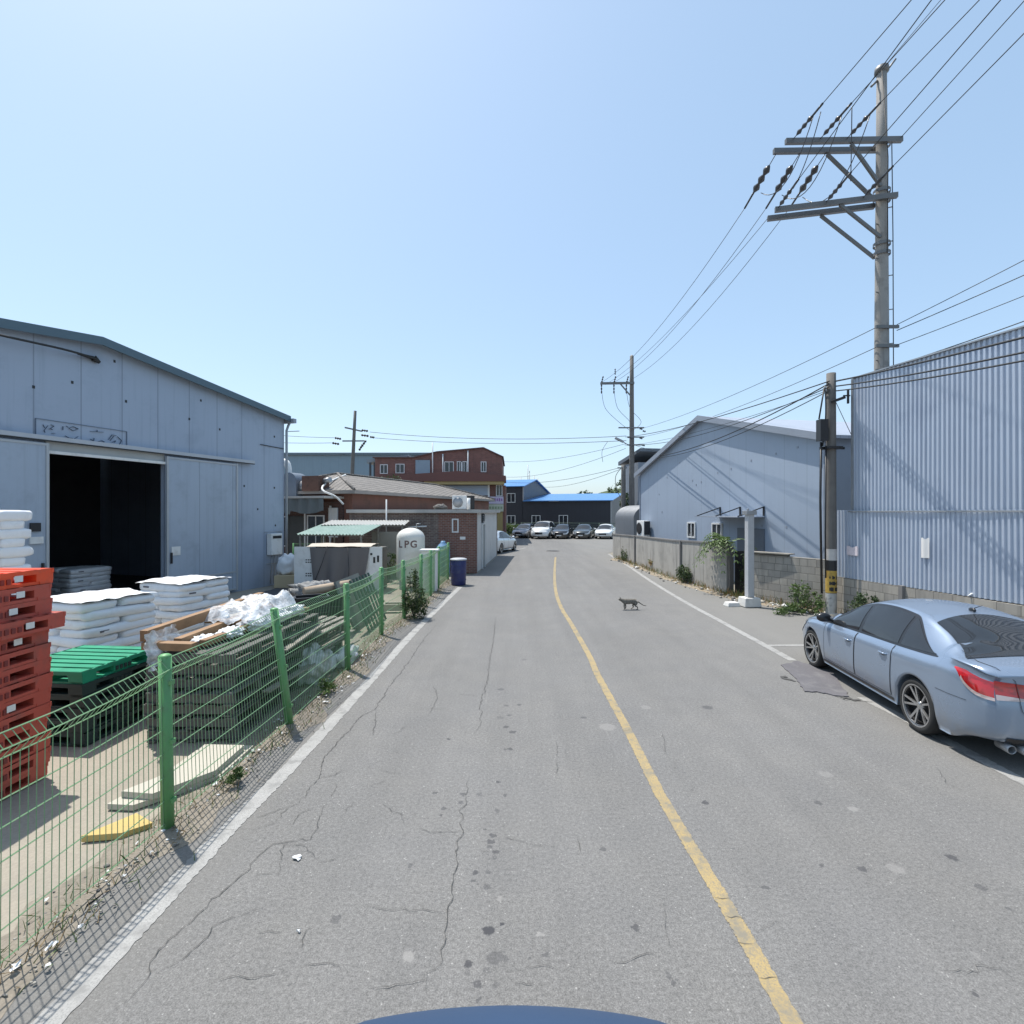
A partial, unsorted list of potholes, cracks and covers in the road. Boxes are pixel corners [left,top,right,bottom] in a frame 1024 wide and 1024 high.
crack [368,778,469,992]
crack [242,631,431,829]
